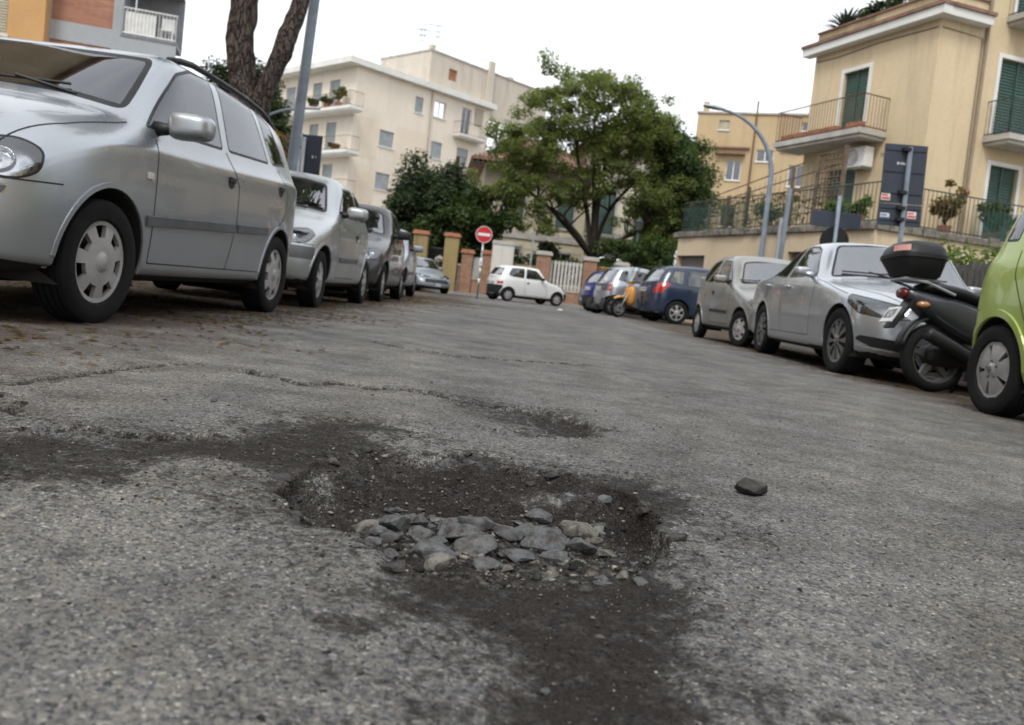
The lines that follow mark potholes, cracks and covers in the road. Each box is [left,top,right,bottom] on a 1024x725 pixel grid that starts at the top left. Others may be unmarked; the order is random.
pothole [274,451,673,590]
crack [234,340,597,435]
pothole [509,404,605,439]
